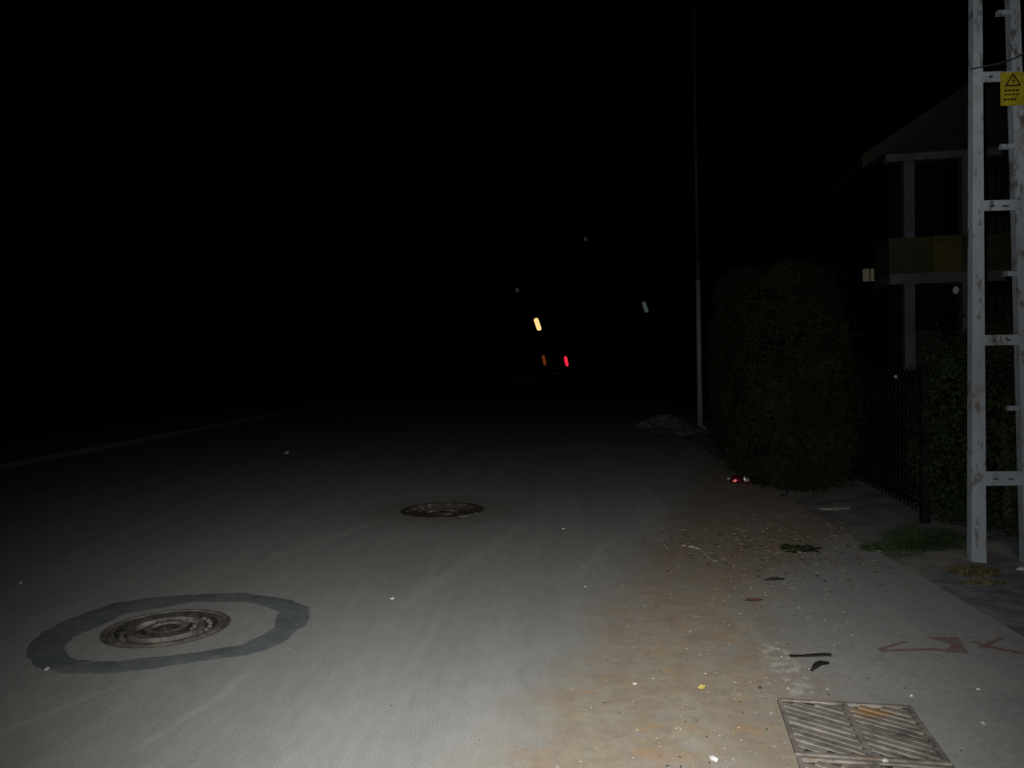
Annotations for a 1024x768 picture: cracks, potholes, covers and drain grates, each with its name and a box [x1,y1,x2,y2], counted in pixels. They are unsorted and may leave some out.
drain grate [796,755,955,768]
manhole cover [400,502,484,518]
manhole cover [99,609,231,649]
drain grate [777,698,952,766]
